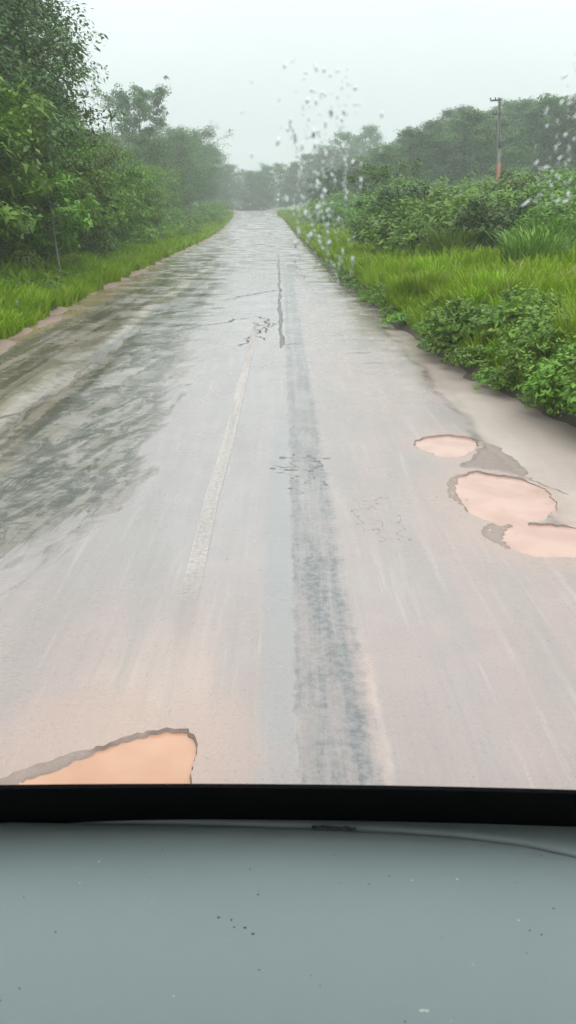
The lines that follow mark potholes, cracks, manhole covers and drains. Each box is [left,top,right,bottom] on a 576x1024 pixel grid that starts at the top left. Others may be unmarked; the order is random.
pothole [446,470,558,526]
pothole [0,727,198,785]
pothole [413,434,479,457]
crack [351,497,412,542]
crack [269,454,330,494]
pothole [481,522,576,558]
crack [177,254,289,349]
